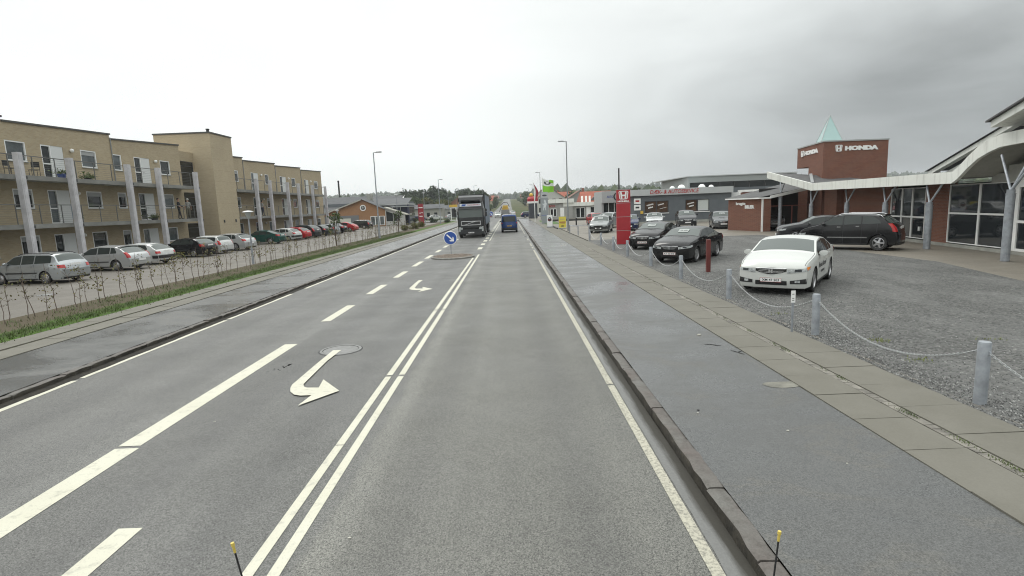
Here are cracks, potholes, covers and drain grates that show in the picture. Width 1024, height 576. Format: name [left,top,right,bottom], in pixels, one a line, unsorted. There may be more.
manhole cover [318,344,363,356]
